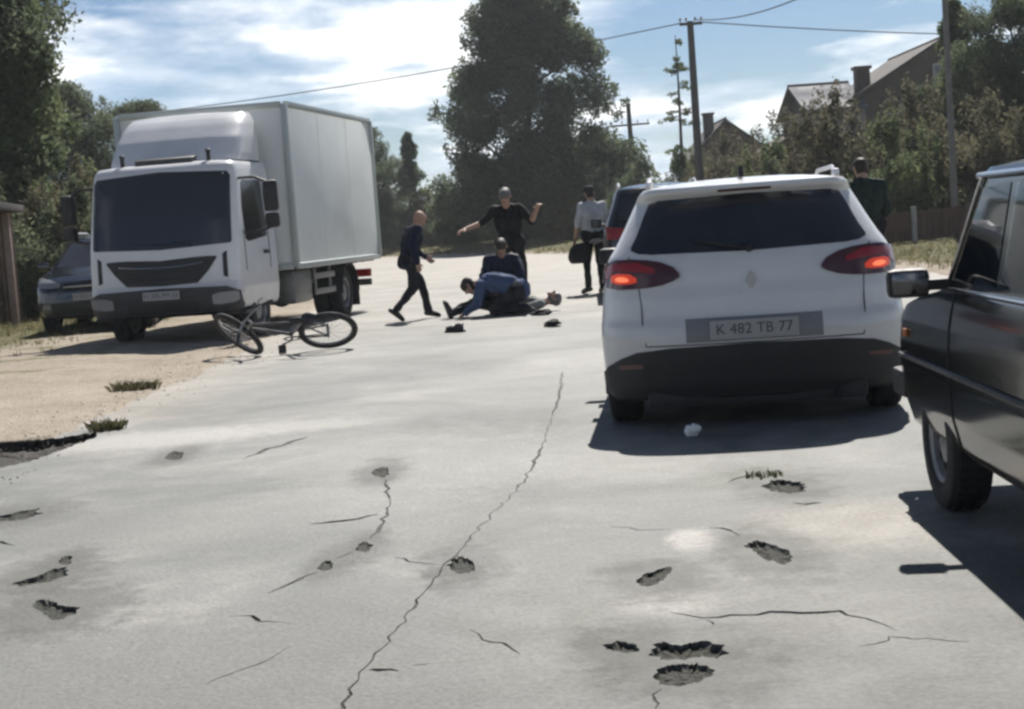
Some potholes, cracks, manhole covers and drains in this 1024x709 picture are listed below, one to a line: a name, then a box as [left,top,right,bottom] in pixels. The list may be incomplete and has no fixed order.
pothole [372,467,389,478]
pothole [32,599,80,620]
pothole [0,508,42,522]
pothole [653,663,715,687]
pothole [761,479,807,494]
pothole [648,641,729,660]
crack [312,372,564,709]
crack [244,437,307,459]
crack [267,572,317,594]
pothole [744,540,792,565]
pothole [11,567,69,586]
pothole [446,556,475,574]
